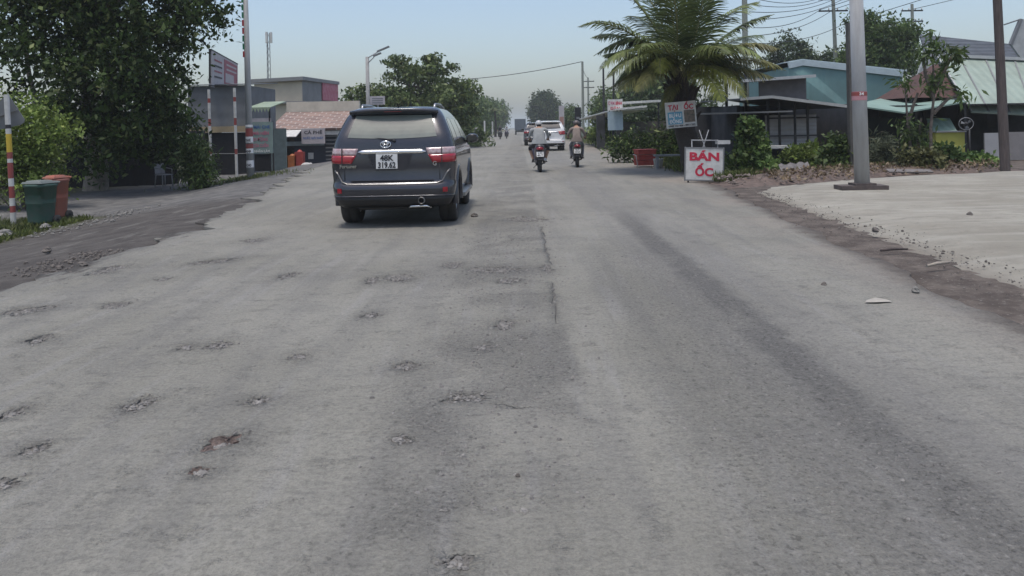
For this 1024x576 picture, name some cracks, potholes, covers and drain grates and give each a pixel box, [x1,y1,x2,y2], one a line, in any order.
pothole [377,273,415,282]
pothole [2,303,72,316]
pothole [391,434,413,445]
pothole [244,395,271,405]
pothole [120,394,161,413]
pothole [202,340,240,349]
pothole [488,319,517,331]
pothole [434,553,475,571]
pothole [392,359,422,371]
pothole [19,438,52,457]
pothole [429,390,492,406]
